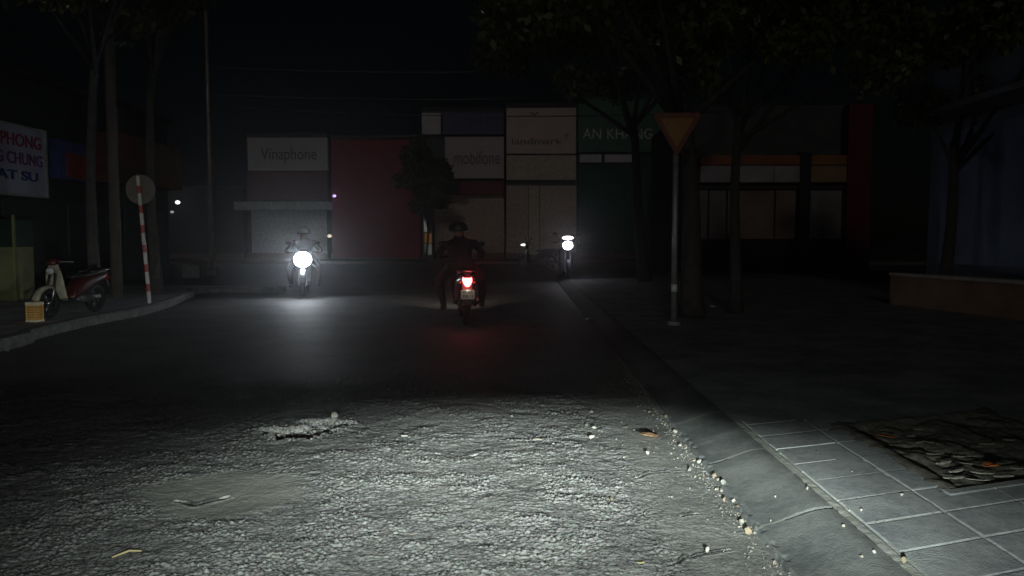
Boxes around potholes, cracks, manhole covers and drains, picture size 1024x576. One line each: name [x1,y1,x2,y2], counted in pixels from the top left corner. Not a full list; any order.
pothole [247,417,361,441]
